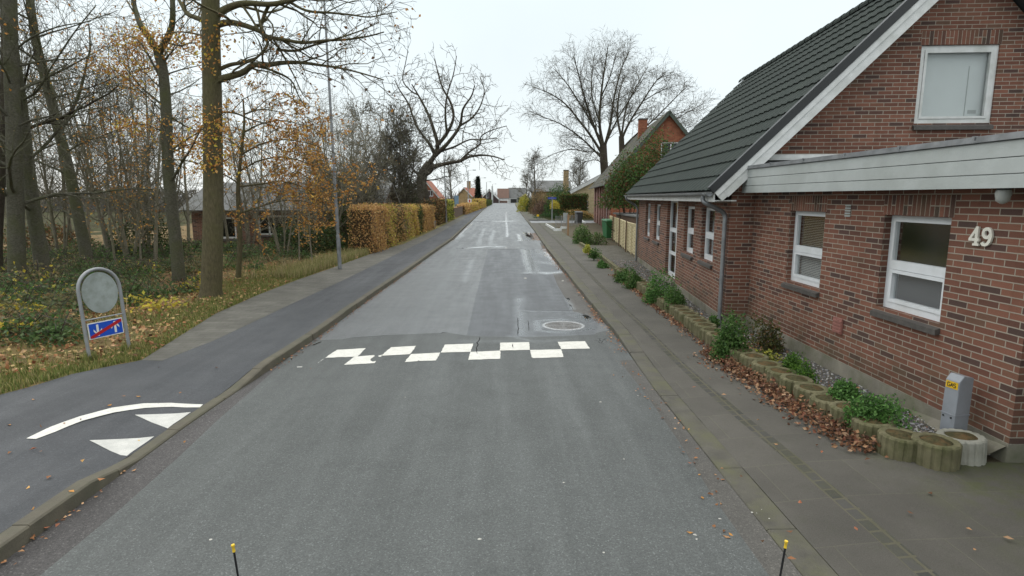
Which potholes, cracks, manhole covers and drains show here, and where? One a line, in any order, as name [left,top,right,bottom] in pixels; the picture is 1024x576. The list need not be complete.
manhole cover [542,321,585,330]
